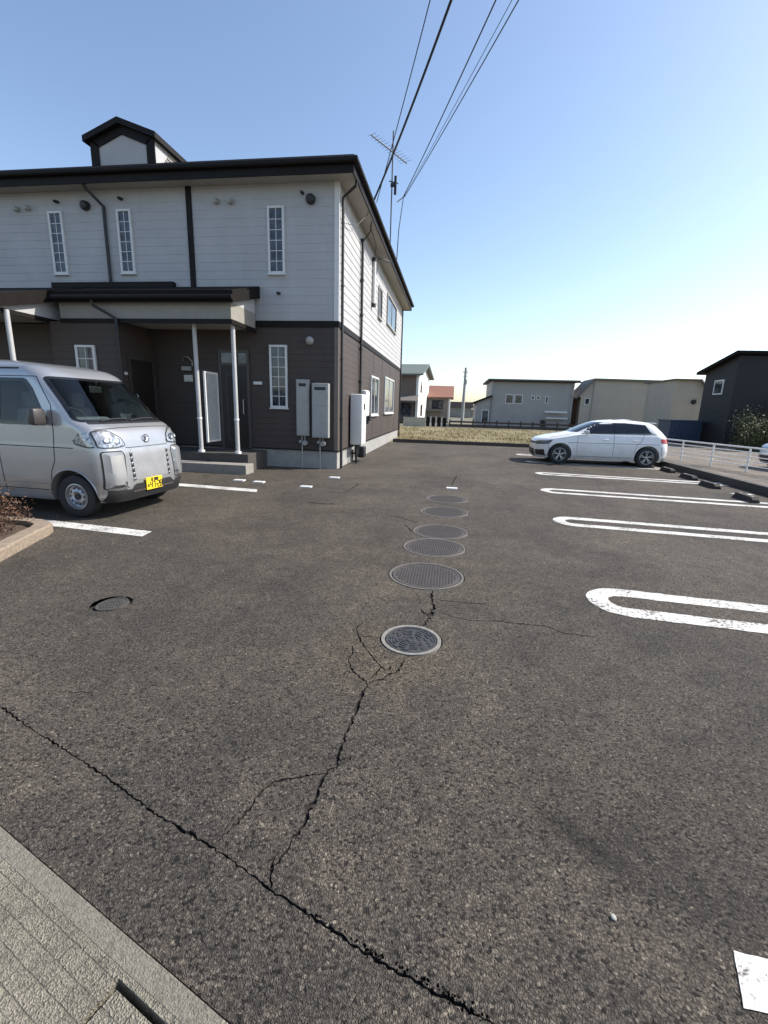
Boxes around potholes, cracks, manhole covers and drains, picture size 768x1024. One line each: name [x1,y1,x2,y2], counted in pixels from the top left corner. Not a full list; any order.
manhole cover [389,563,464,593]
manhole cover [380,625,442,656]
manhole cover [413,525,468,542]
manhole cover [92,597,133,612]
crack [420,590,590,637]
manhole cover [426,495,468,503]
manhole cover [420,507,468,518]
crack [212,622,407,891]
manhole cover [403,538,466,557]
